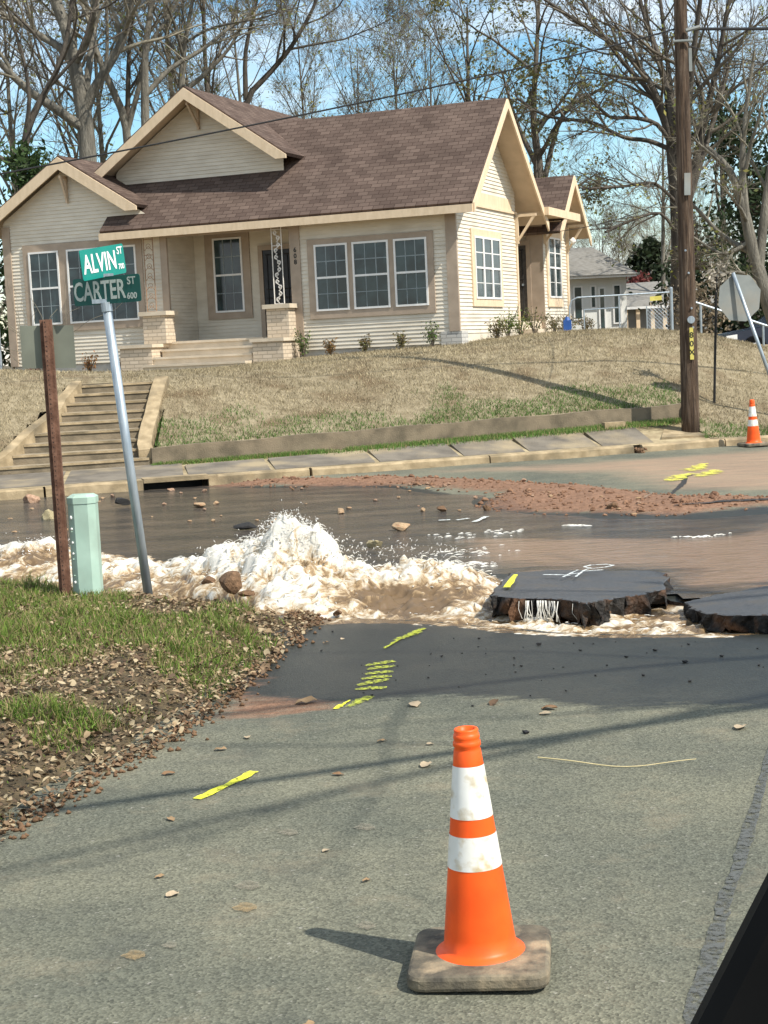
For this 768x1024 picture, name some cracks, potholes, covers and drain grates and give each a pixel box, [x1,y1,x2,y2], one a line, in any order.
drain grate [137,474,218,491]
